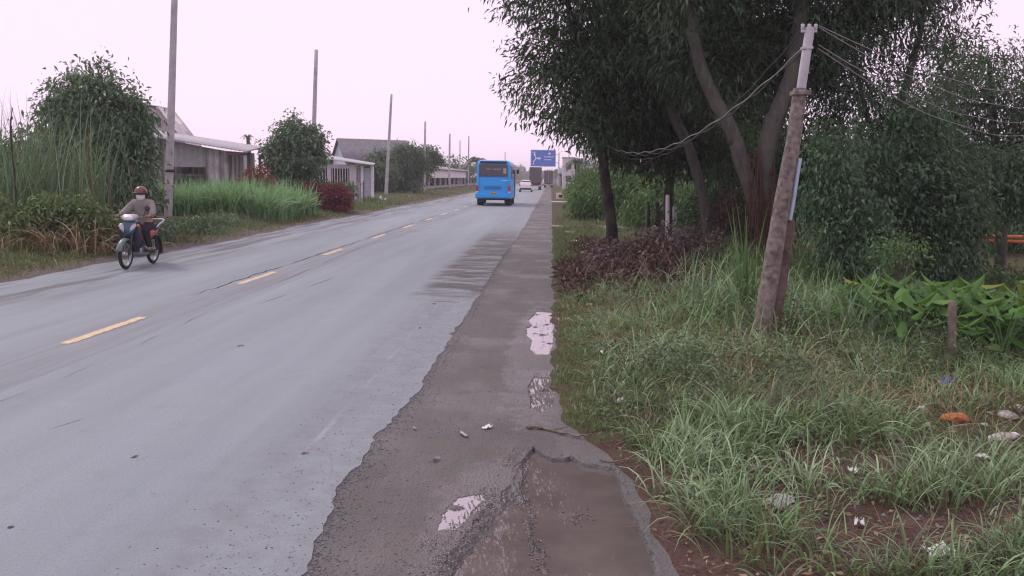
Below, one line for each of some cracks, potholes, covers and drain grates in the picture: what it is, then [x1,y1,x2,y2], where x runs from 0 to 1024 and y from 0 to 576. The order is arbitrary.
pothole [395,441,666,576]
pothole [528,376,556,413]
pothole [525,311,555,355]
